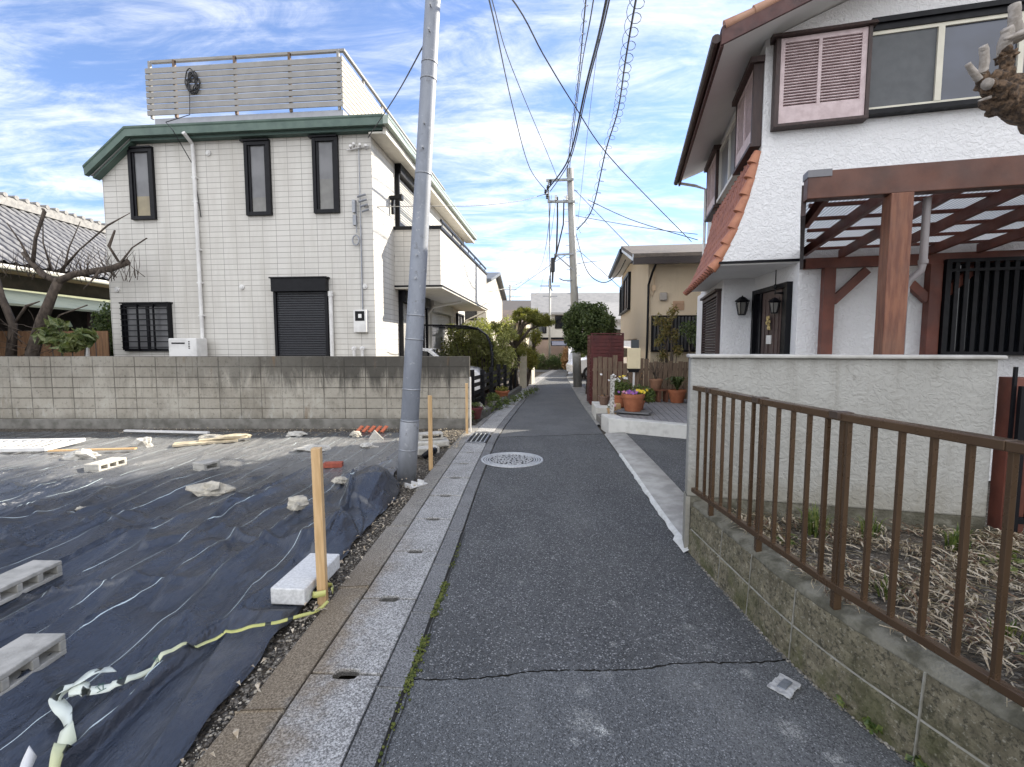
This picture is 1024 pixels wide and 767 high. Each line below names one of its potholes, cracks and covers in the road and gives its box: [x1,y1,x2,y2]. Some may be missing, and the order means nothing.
manhole cover [481,452,543,468]
drain grate [465,433,491,443]
crack [418,659,788,681]
